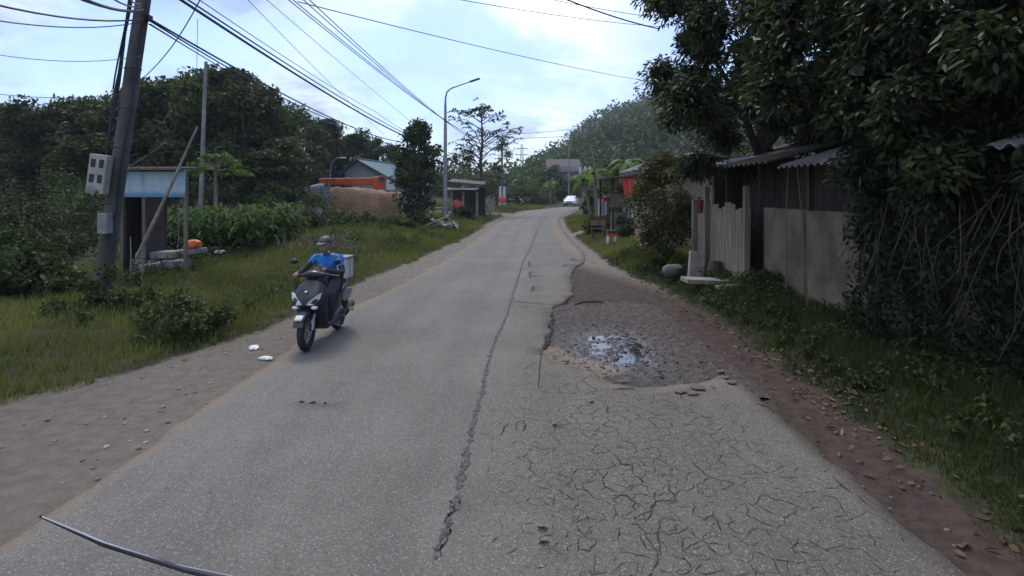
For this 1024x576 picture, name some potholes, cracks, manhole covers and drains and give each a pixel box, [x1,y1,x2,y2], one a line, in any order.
crack [483,301,922,576]
pothole [542,300,771,400]
